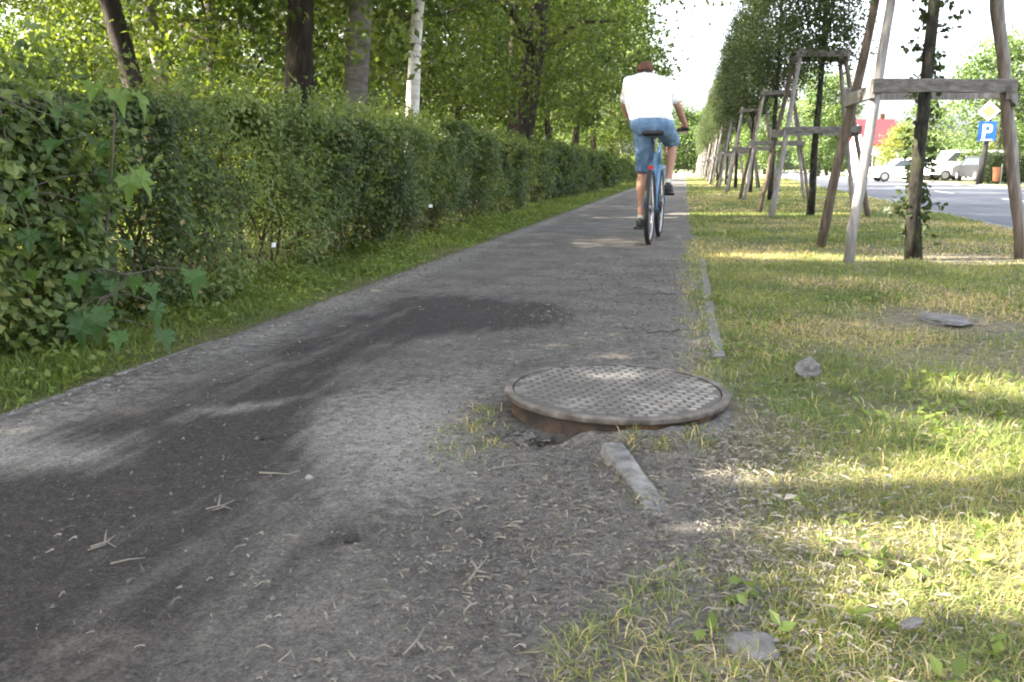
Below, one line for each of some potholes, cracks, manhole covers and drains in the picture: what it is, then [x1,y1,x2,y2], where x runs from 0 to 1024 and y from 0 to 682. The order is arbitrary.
pothole [525,431,580,447]
manhole cover [504,363,731,434]
